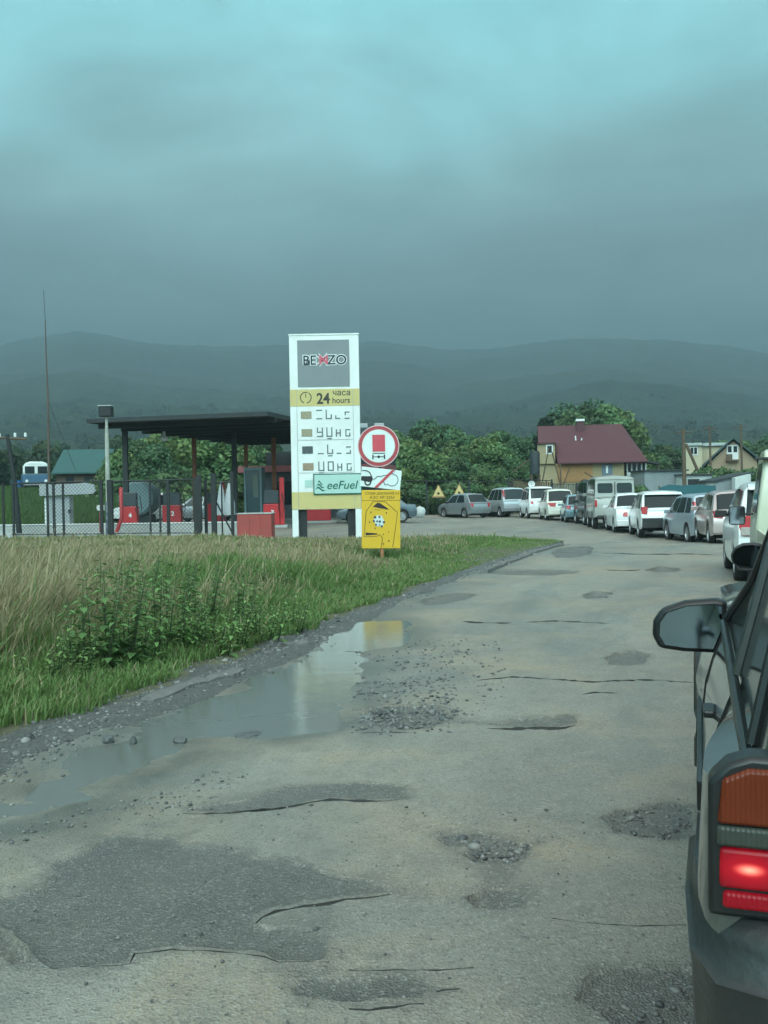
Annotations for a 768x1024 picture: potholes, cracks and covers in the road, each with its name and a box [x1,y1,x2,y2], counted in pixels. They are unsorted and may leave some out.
pothole [357,702,455,730]
crack [477,676,694,694]
pothole [599,803,696,841]
crack [255,894,389,923]
pothole [436,830,535,864]
pothole [464,886,530,909]
crack [552,918,686,927]
